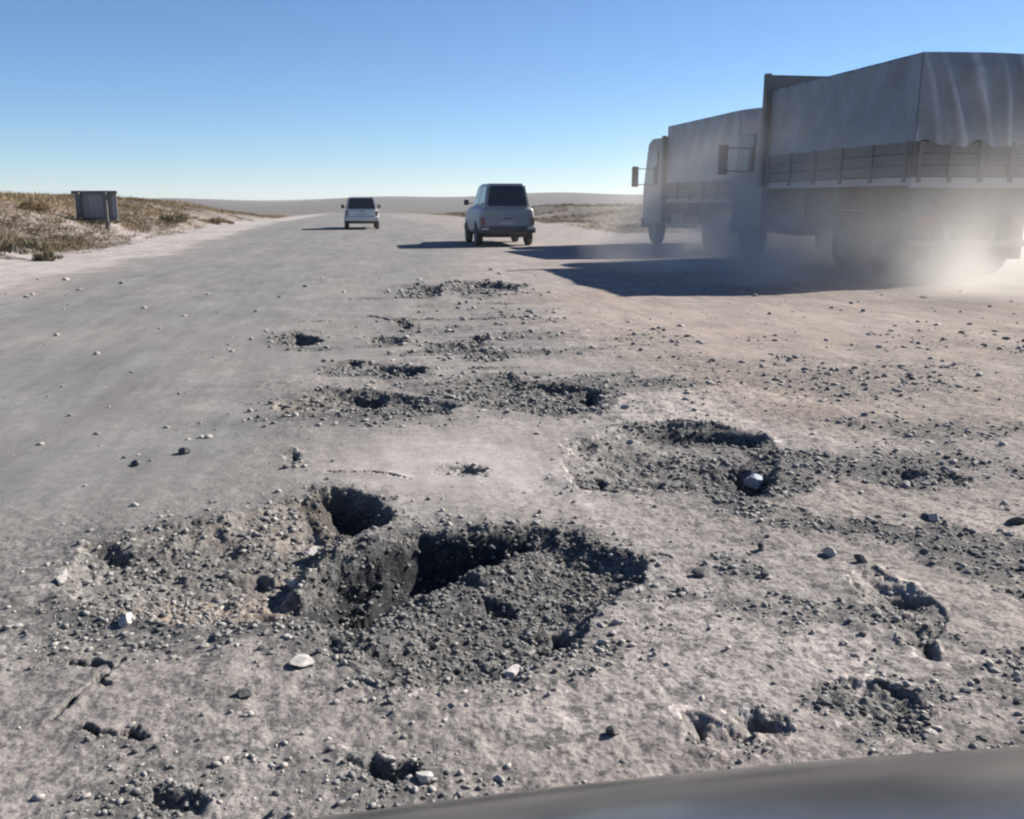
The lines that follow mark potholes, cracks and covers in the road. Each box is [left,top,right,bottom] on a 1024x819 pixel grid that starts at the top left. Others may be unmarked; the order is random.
pothole [449,281,520,294]
pothole [270,332,322,346]
pothole [561,421,783,497]
pothole [462,352,505,363]
pothole [406,286,441,298]
pothole [849,565,947,662]
pothole [808,677,932,739]
pothole [444,375,607,418]
pothole [361,336,408,344]
pothole [132,784,207,819]
pothole [432,338,488,352]
pothole [290,525,647,689]
